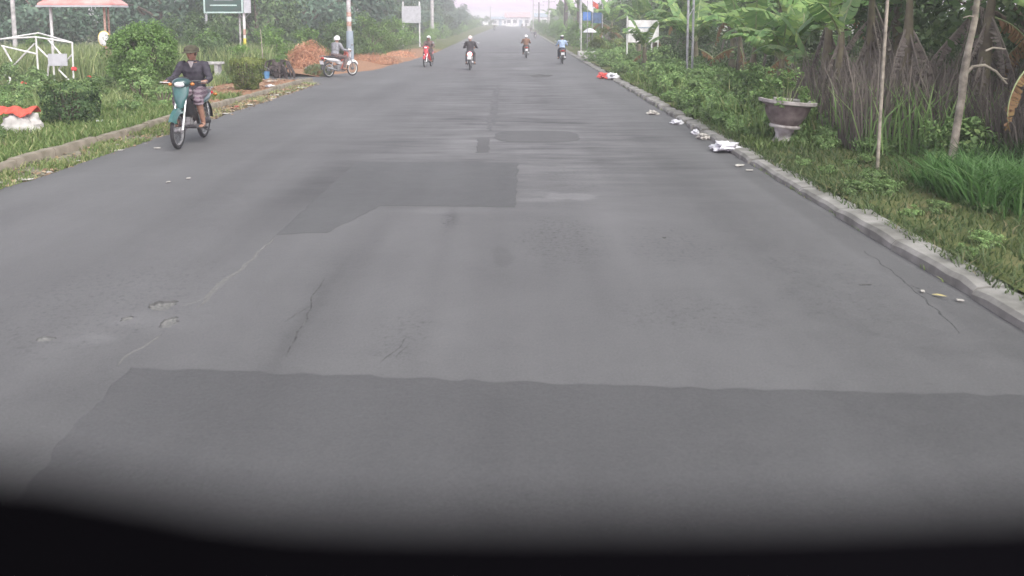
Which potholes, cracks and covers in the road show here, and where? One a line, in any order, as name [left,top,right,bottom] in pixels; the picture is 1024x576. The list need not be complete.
crack [117,335,161,366]
pothole [159,316,179,328]
crack [284,283,322,356]
pothole [148,300,179,311]
crack [866,253,959,333]
